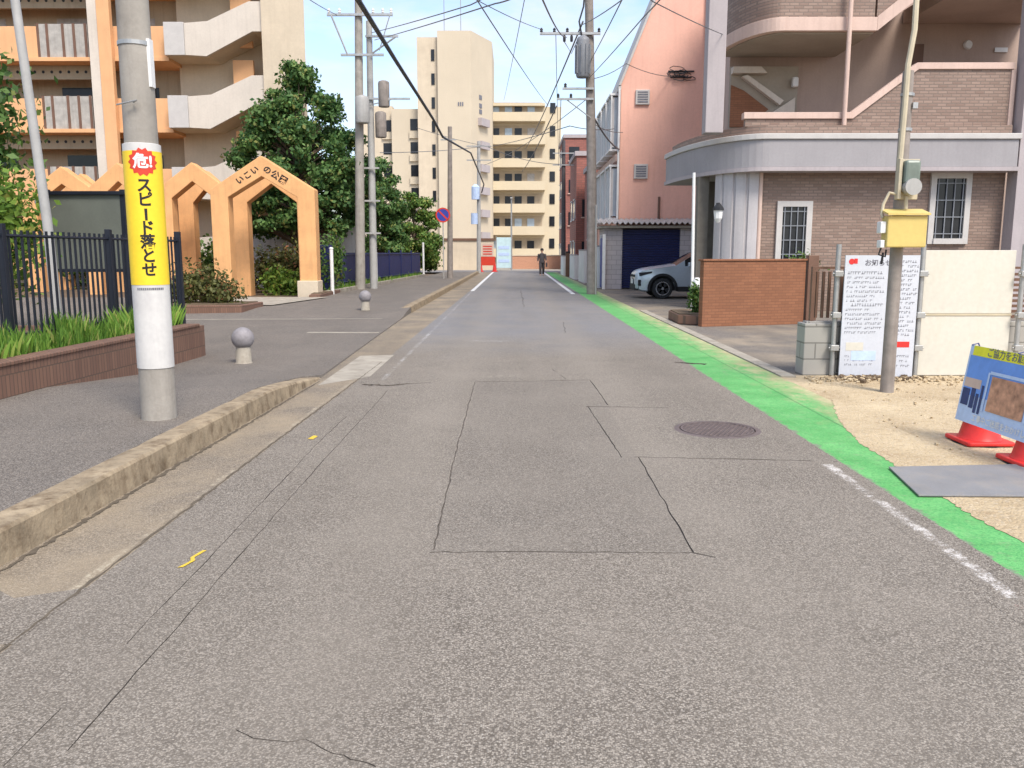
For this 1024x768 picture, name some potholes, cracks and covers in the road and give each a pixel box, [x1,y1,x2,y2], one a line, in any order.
manhole cover [674,421,761,439]
crack [4,382,431,766]
